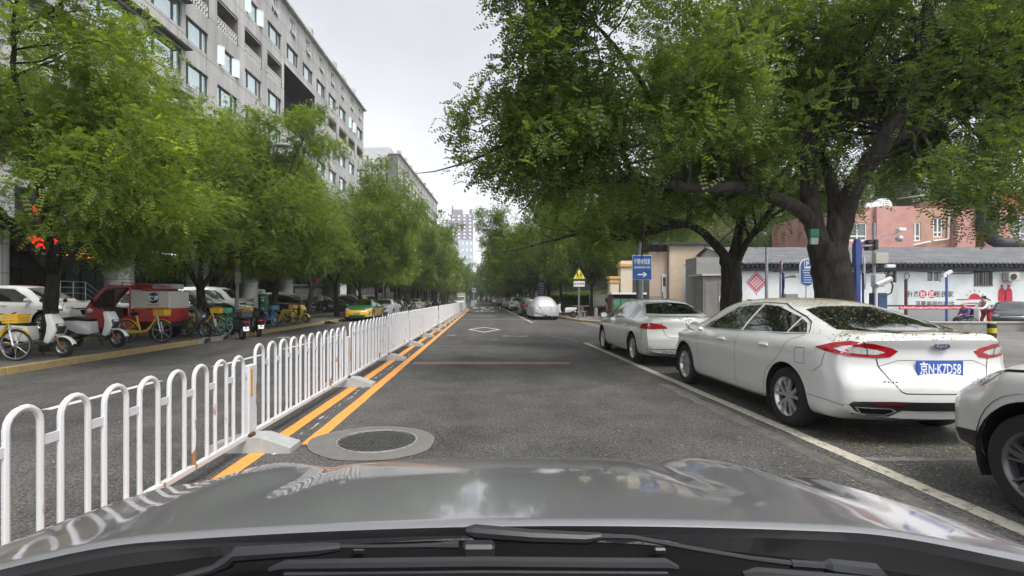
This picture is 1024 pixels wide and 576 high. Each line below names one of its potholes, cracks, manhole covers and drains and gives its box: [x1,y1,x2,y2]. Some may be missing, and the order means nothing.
manhole cover [305,426,436,461]
